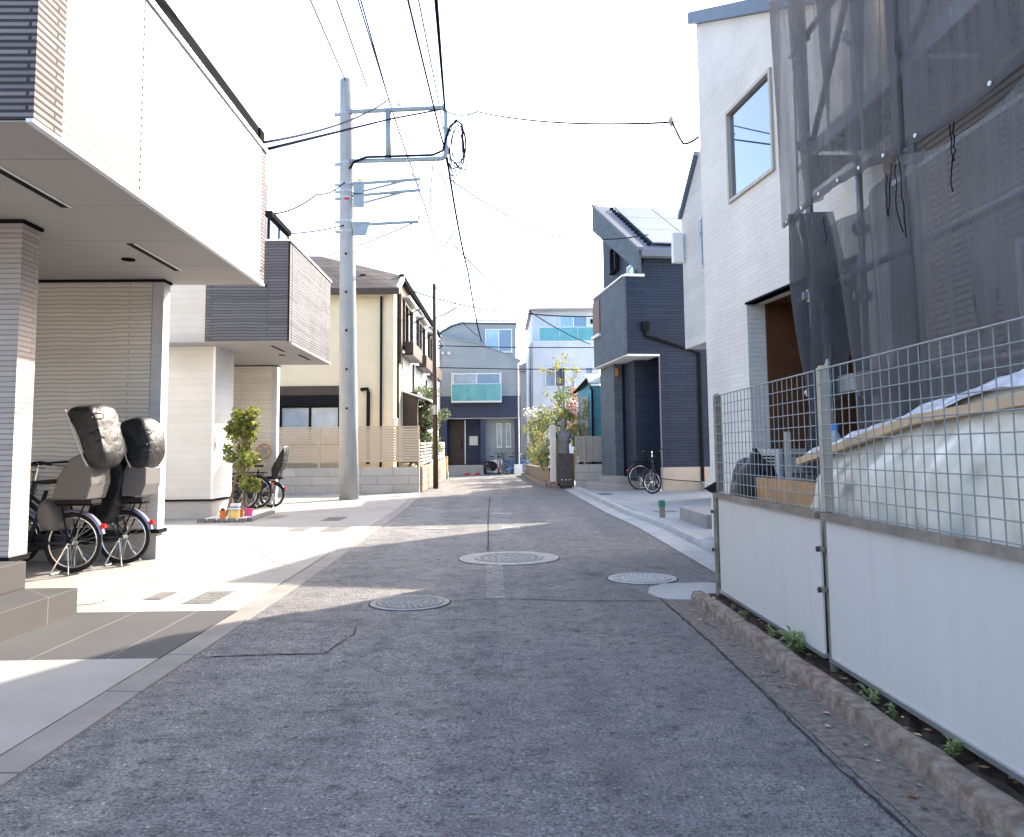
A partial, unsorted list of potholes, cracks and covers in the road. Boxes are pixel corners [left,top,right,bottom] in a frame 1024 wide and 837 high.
manhole cover [606,573,679,585]
drain grate [143,592,178,600]
drain grate [182,591,235,604]
manhole cover [368,595,451,611]
manhole cover [458,551,560,566]
